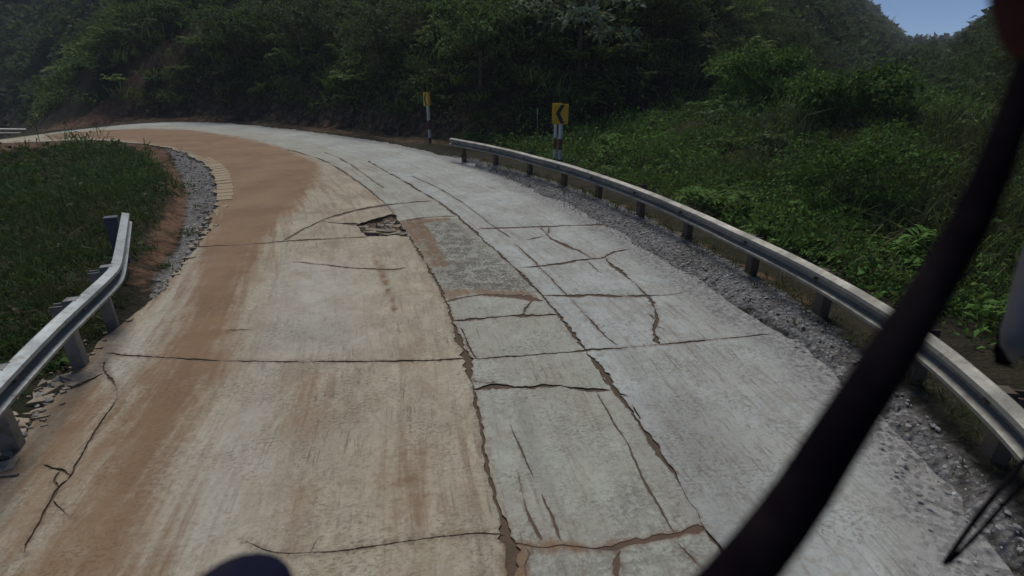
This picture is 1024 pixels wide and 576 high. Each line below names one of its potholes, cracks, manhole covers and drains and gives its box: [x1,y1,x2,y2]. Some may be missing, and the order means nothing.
pothole [356,214,409,237]
crack [248,150,721,576]
crack [24,362,117,552]
